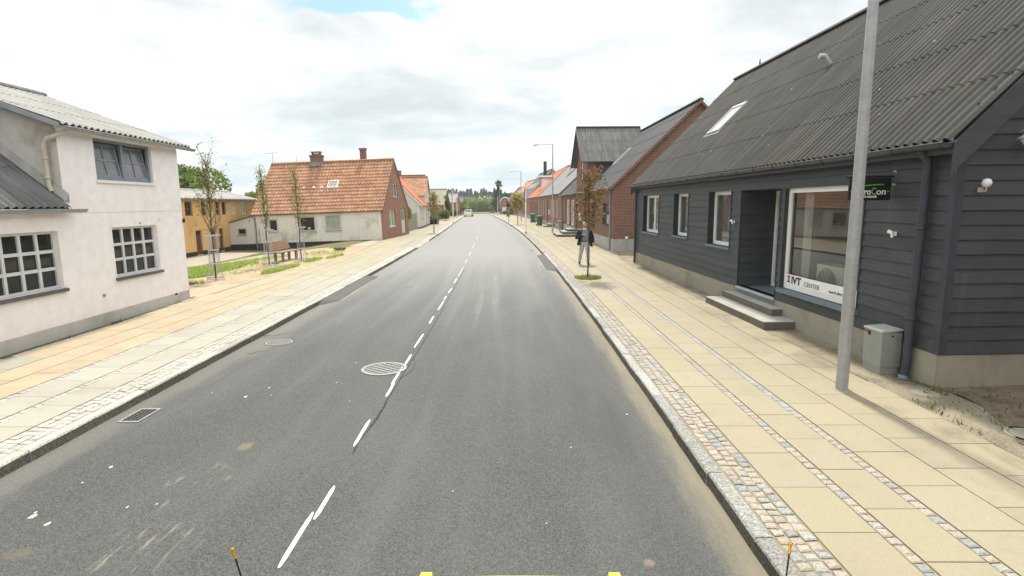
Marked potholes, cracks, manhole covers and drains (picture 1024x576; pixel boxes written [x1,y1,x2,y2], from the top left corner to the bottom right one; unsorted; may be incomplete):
crack [352,270,464,454]
drain grate [117,408,162,423]
manhole cover [361,362,407,376]
